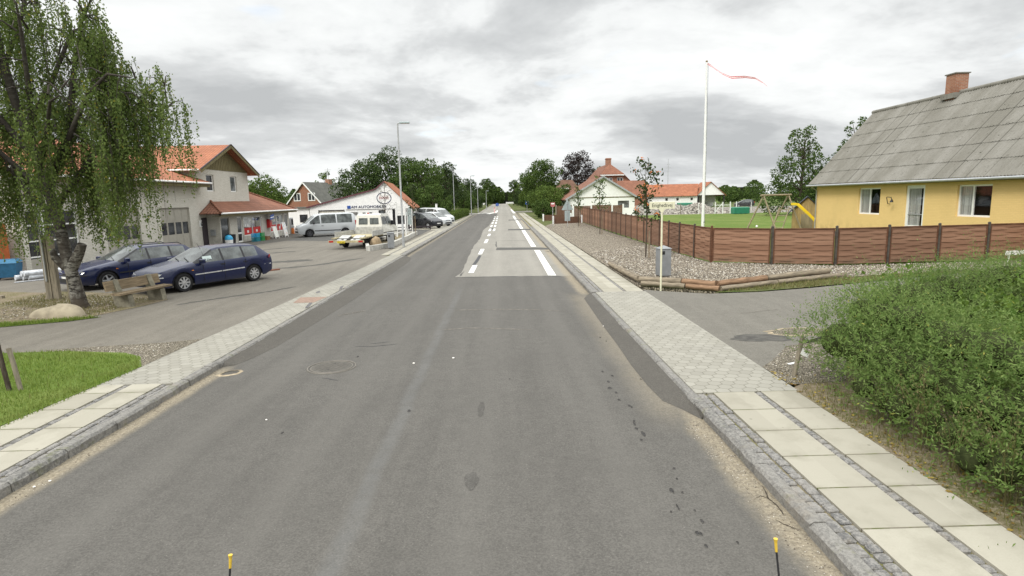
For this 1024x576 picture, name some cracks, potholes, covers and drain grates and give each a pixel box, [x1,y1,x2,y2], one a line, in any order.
manhole cover [307,360,356,374]
crack [756,489,798,530]
